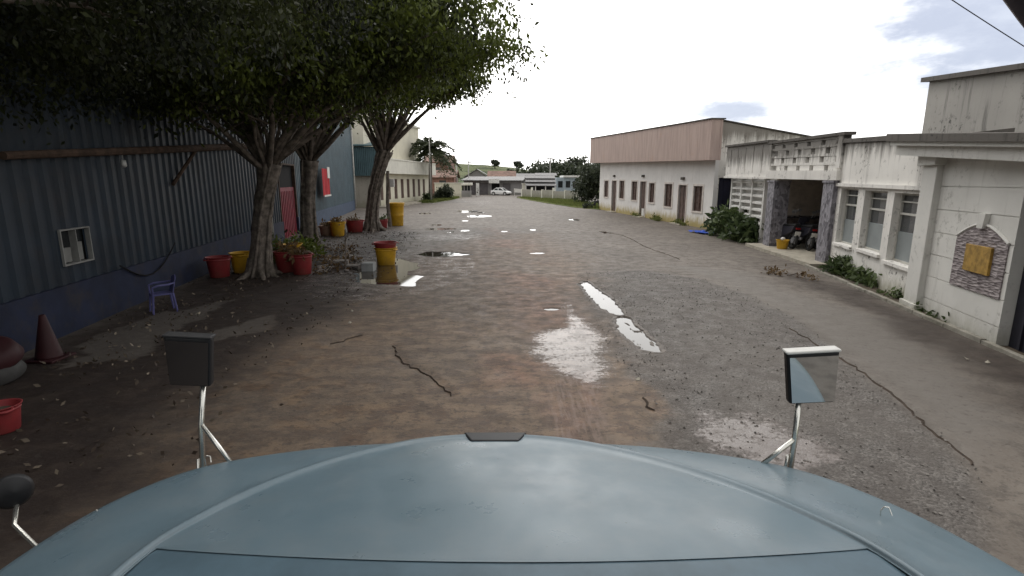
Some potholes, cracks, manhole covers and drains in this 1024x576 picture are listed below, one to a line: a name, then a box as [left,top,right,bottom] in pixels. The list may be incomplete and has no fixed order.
crack [599,231,680,260]
crack [392,346,452,397]
